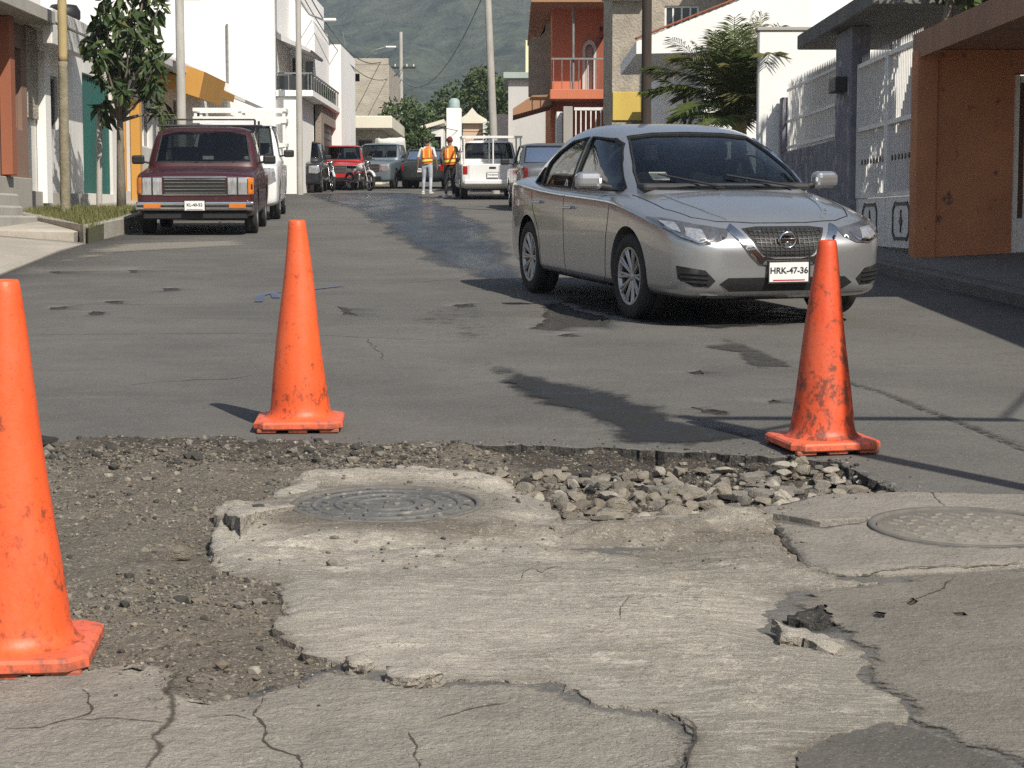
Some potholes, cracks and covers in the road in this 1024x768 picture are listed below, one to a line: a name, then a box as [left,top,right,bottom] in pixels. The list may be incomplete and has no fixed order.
manhole cover [290,485,483,523]
crack [441,702,508,718]
crack [409,733,421,768]
pothole [43,436,857,705]
crack [839,562,1024,604]
crack [207,697,304,768]
manhole cover [867,506,1024,547]
crack [5,690,163,729]
crack [46,333,420,360]
crack [671,713,698,768]
